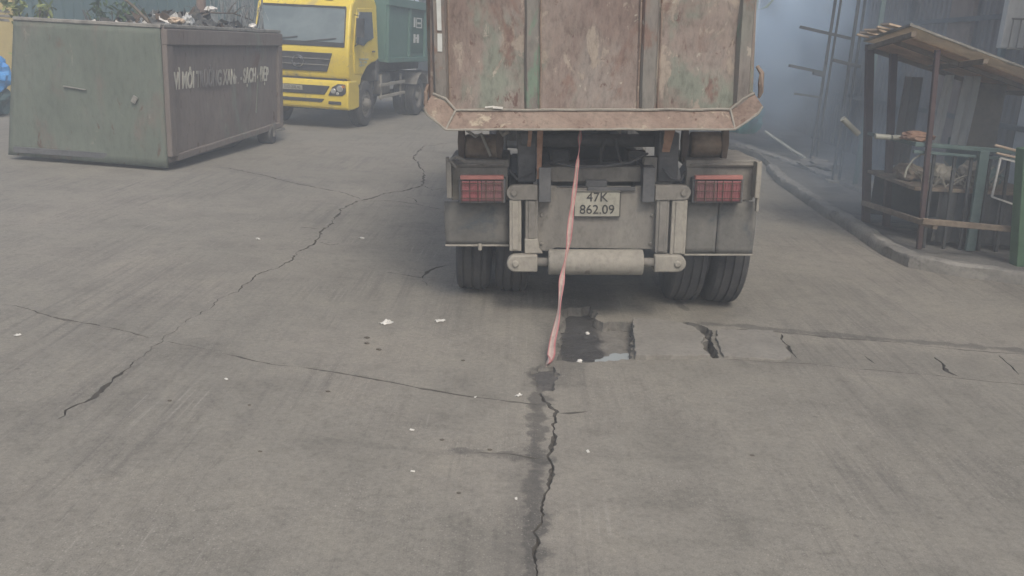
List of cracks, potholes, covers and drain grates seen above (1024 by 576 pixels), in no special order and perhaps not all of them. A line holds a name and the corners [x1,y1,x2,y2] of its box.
crack [728,329,1024,385]
pothole [555,306,634,363]
crack [58,142,452,419]
